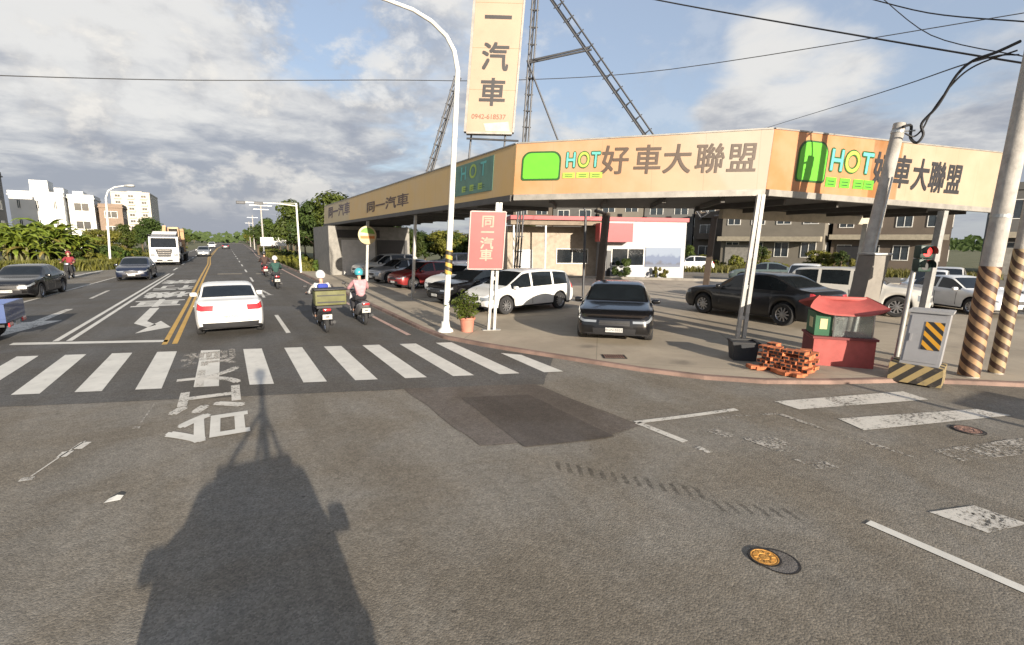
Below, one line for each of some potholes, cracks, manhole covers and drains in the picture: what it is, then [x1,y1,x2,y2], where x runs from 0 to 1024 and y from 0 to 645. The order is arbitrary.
manhole cover [747,547,801,574]
manhole cover [949,425,987,435]
